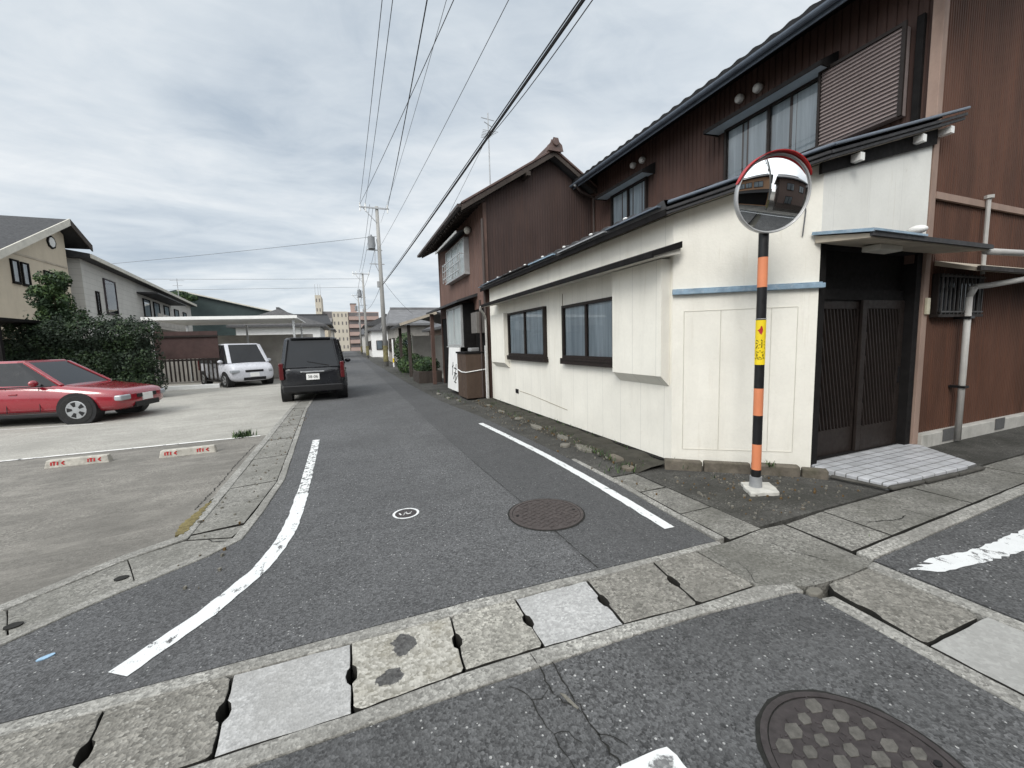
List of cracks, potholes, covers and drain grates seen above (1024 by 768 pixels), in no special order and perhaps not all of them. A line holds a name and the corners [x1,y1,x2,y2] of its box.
manhole cover [755,689,966,768]
manhole cover [508,498,585,531]
crack [510,662,627,768]
